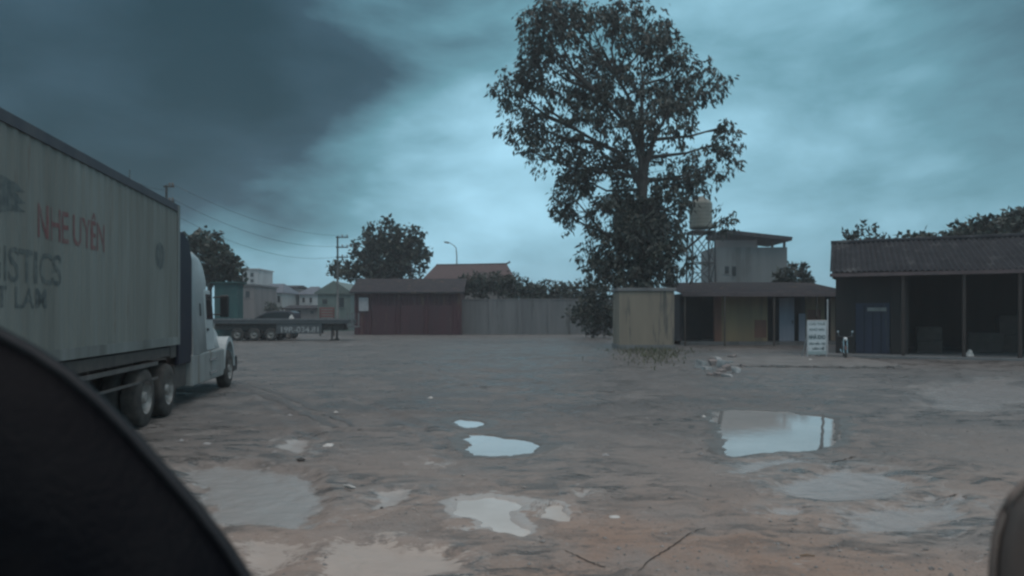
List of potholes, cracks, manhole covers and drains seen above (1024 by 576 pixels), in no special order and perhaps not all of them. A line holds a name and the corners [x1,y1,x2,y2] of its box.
pothole [168,455,358,535]
pothole [446,430,564,459]
pothole [697,407,860,460]
pothole [526,498,590,528]
pothole [429,490,559,543]
pothole [439,416,501,430]
pothole [278,529,492,576]
